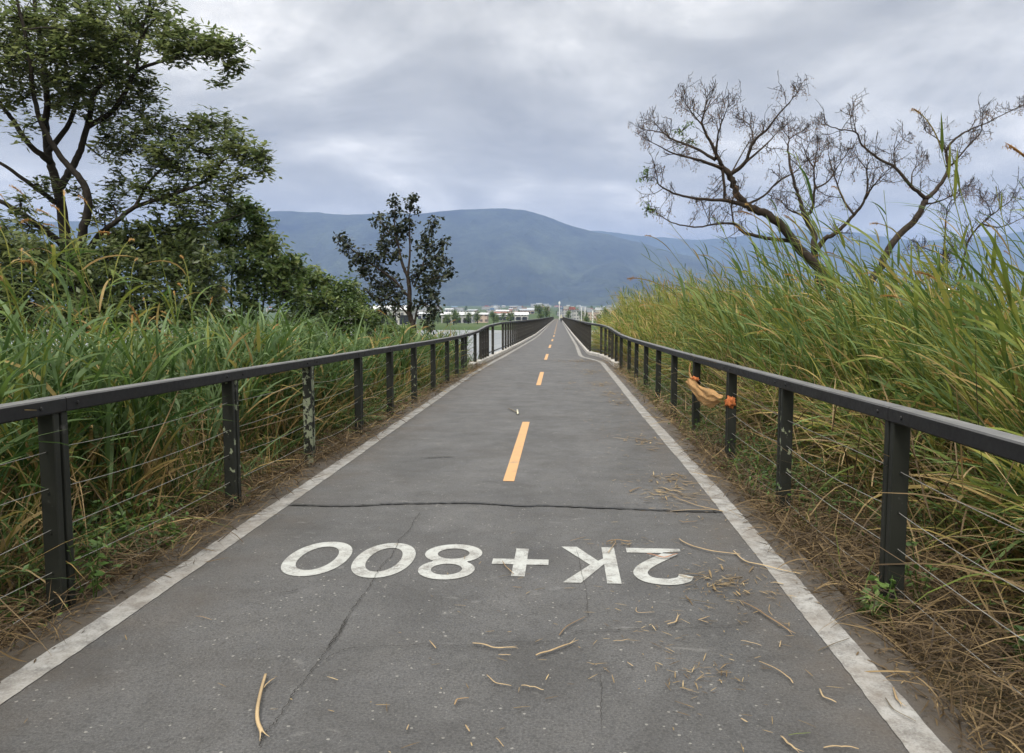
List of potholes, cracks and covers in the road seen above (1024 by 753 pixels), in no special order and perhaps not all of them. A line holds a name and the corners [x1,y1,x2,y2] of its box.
crack [258,501,726,749]
